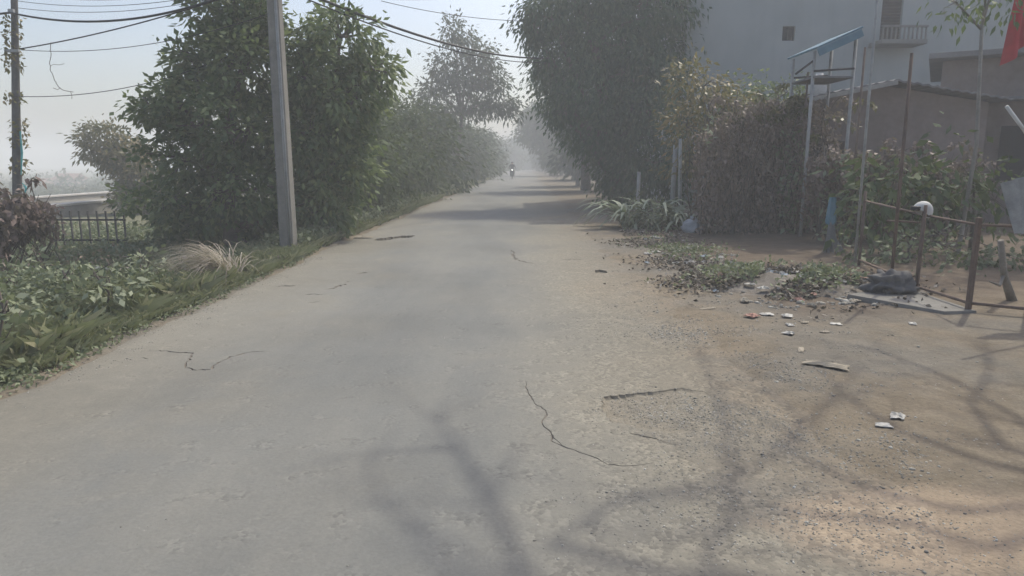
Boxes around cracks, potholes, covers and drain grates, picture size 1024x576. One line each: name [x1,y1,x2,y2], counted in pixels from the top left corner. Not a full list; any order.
crack [145,350,260,370]
crack [525,383,652,466]
